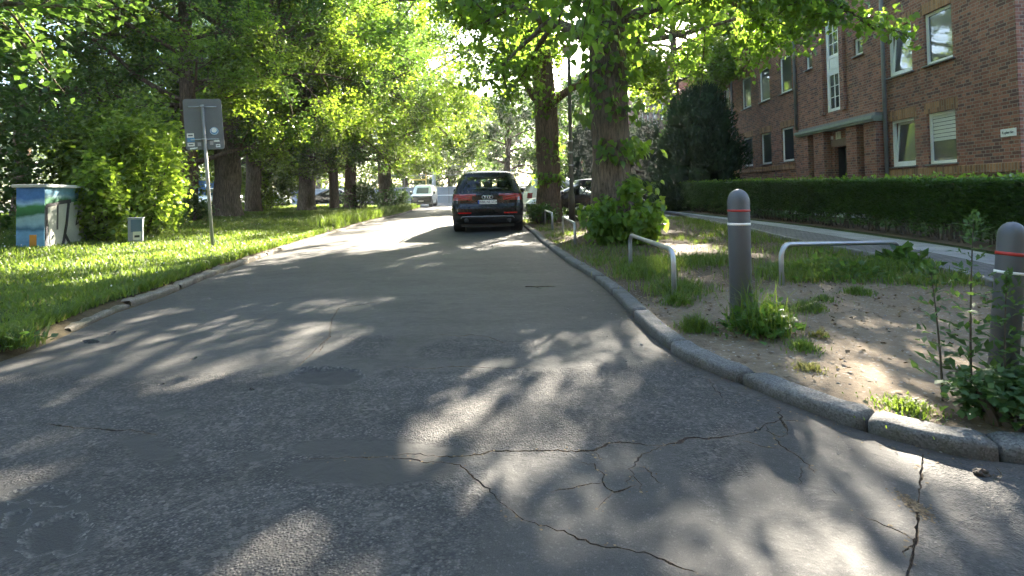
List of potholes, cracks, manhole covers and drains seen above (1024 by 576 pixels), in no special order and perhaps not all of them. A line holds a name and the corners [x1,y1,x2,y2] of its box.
crack [51,424,157,435]
crack [309,408,815,574]
